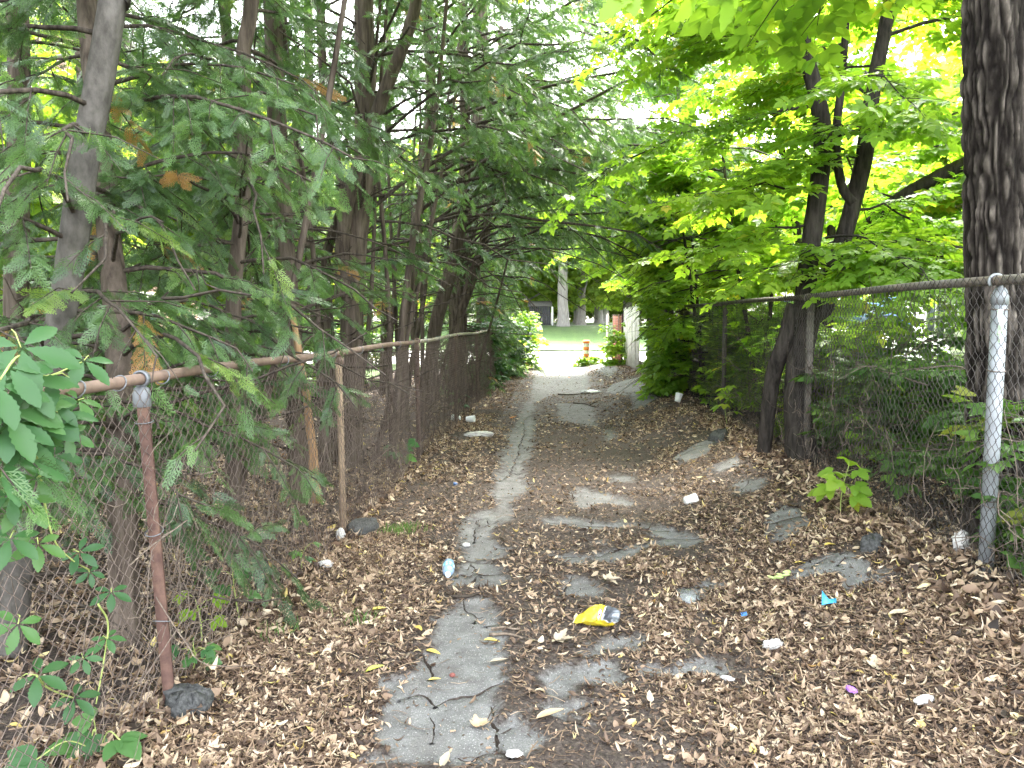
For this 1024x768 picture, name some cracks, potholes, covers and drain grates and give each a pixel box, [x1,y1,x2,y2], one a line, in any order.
crack [497,415,534,482]
crack [399,654,515,766]
crack [455,502,515,629]
